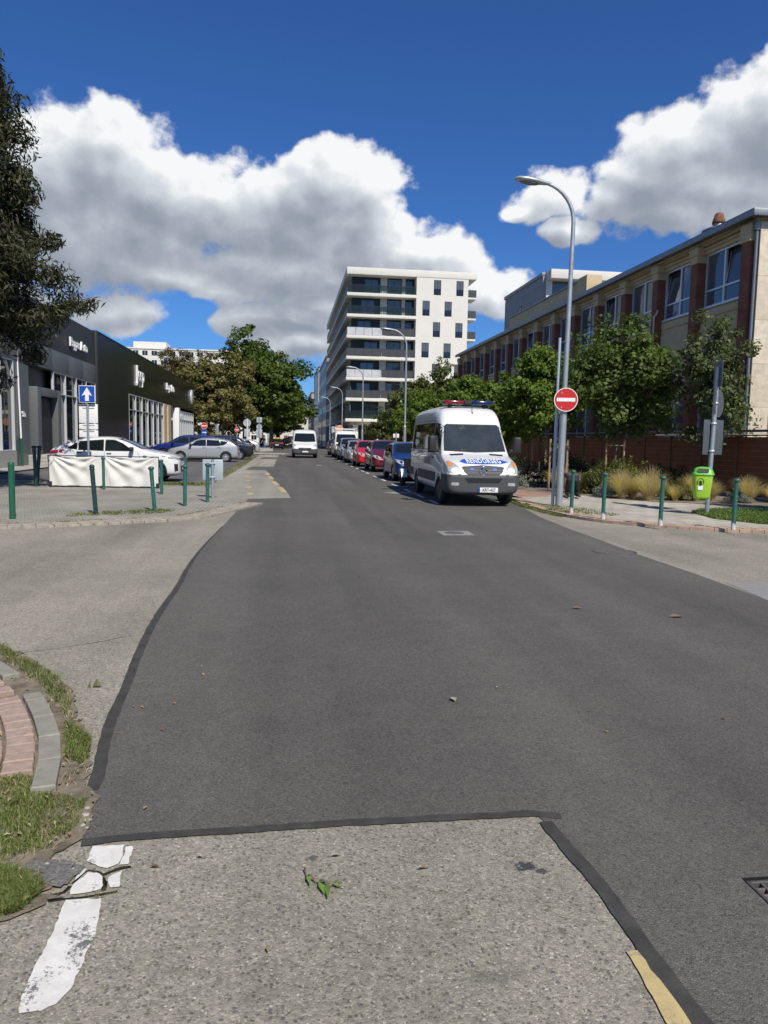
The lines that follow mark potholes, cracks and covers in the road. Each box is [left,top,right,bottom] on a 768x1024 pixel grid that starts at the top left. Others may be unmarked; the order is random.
drain grate [741,876,768,904]
crack [48,866,131,903]
